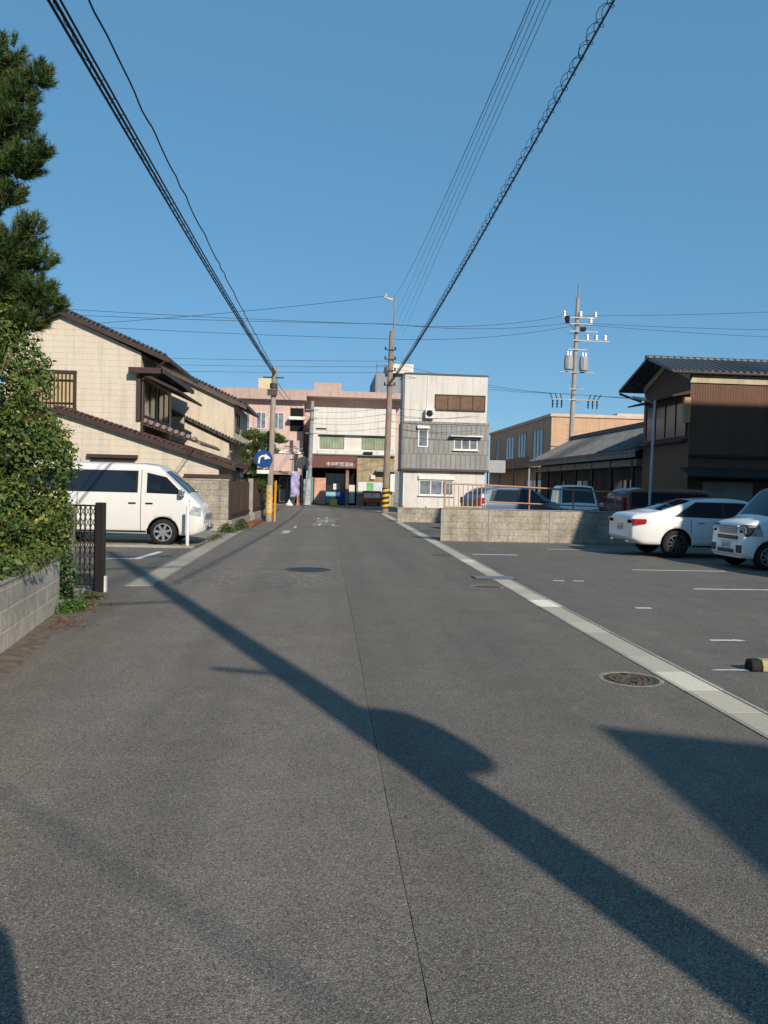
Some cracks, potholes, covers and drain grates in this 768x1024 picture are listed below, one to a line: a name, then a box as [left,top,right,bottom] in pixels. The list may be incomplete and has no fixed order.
manhole cover [597,671,664,687]
